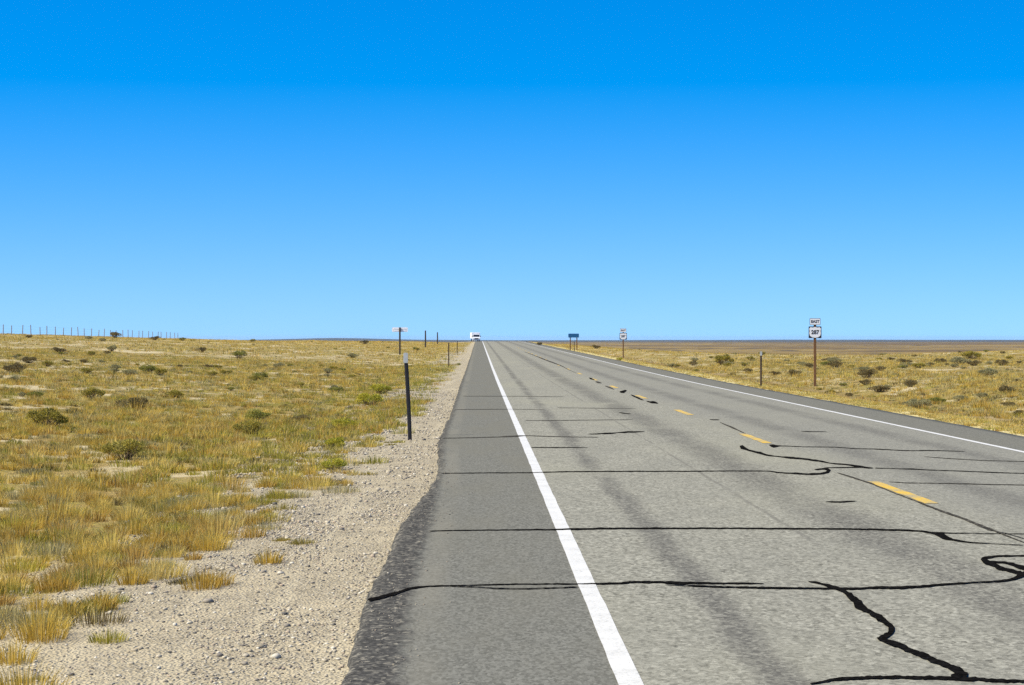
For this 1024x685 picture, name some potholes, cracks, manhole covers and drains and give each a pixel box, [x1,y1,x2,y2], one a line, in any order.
crack [463,396,645,448]
